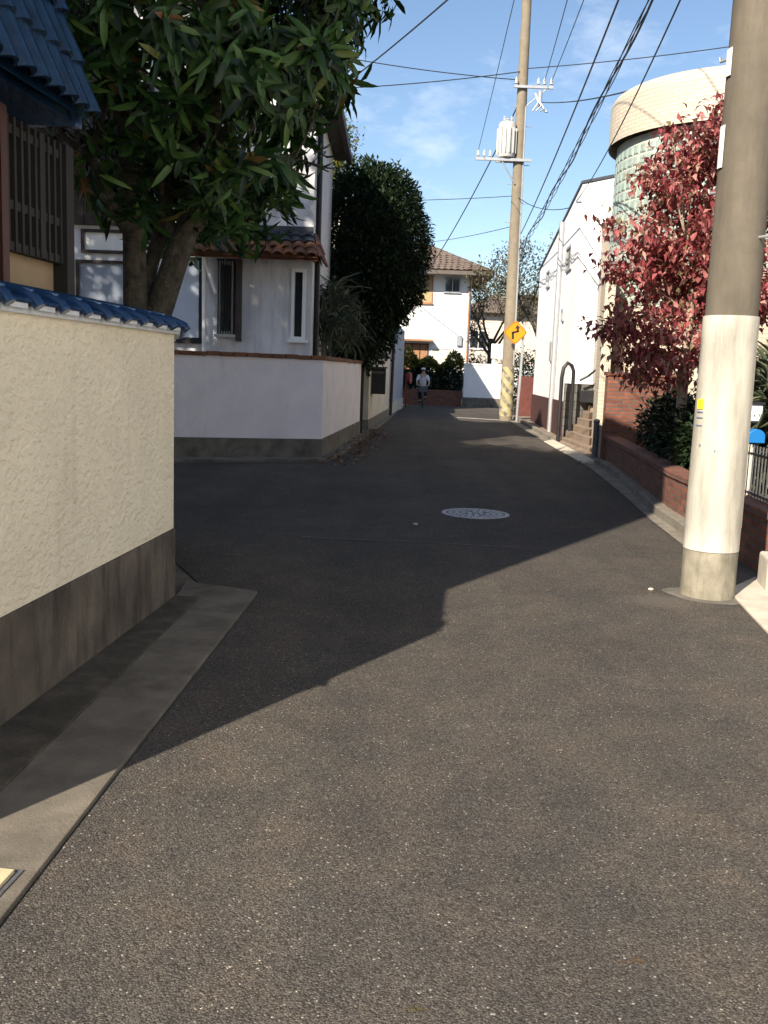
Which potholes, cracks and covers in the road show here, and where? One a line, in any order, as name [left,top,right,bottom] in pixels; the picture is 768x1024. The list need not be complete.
manhole cover [0,867,24,896]
manhole cover [442,508,510,519]
